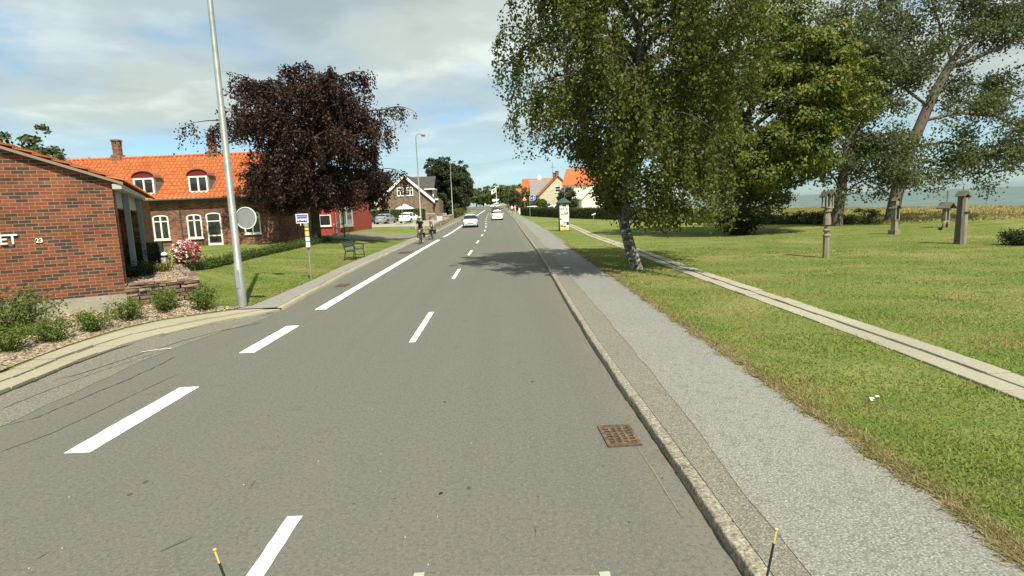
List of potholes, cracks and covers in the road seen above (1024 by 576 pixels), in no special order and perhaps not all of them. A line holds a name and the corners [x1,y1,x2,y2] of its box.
drain grate [597,424,643,447]
